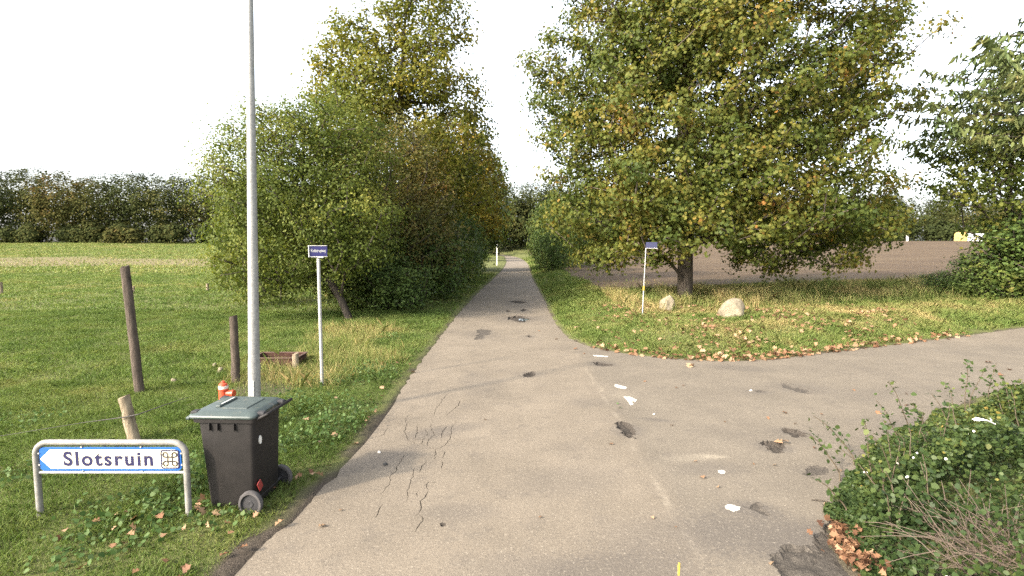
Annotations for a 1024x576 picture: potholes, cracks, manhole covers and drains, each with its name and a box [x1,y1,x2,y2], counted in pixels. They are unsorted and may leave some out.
pothole [614,421,637,439]
crack [375,401,460,532]
pothole [769,523,850,576]
pothole [782,428,809,438]
pothole [759,440,786,453]
pothole [802,465,829,476]
